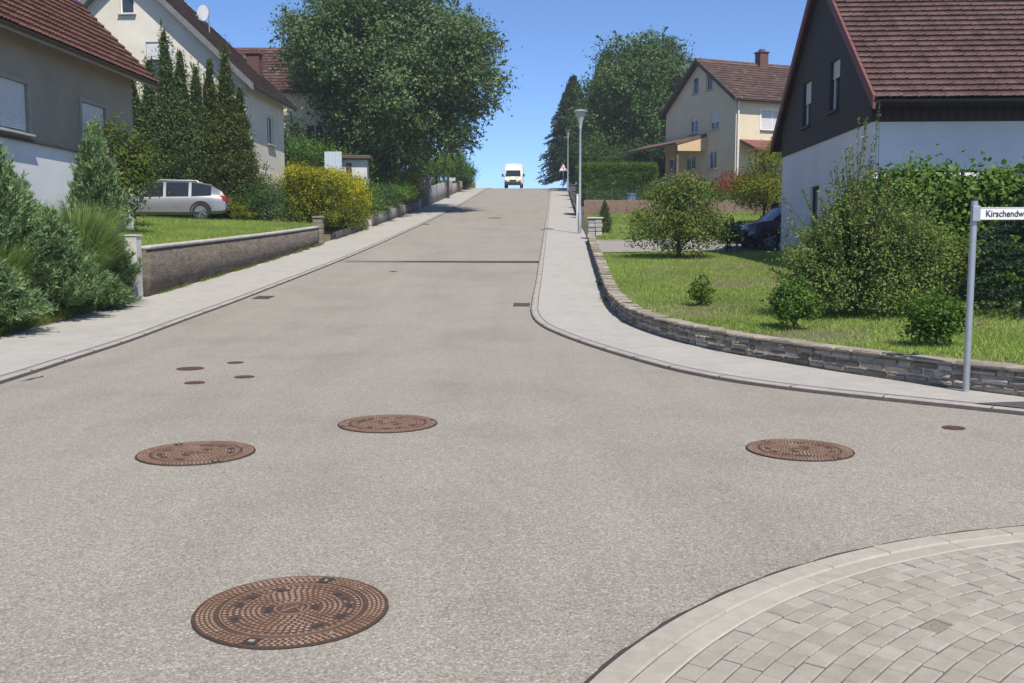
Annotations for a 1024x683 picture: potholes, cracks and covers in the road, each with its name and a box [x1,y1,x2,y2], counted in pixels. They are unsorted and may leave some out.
manhole cover [337,414,438,433]
manhole cover [745,439,855,462]
manhole cover [135,441,256,466]
manhole cover [191,576,389,649]
